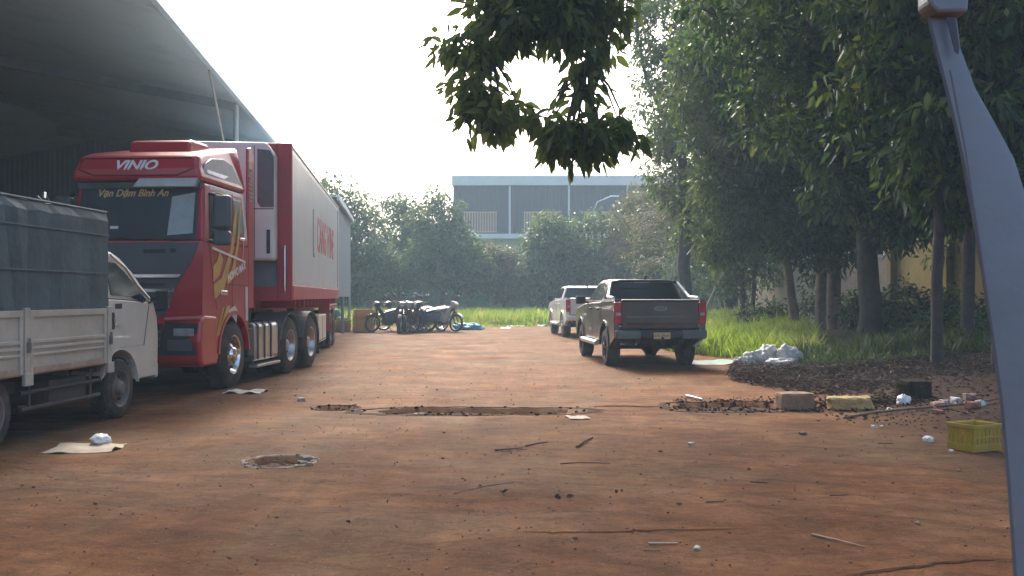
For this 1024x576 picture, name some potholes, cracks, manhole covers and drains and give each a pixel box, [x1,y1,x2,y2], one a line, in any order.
pothole [658,400,800,413]
crack [843,558,997,576]
pothole [341,405,604,416]
